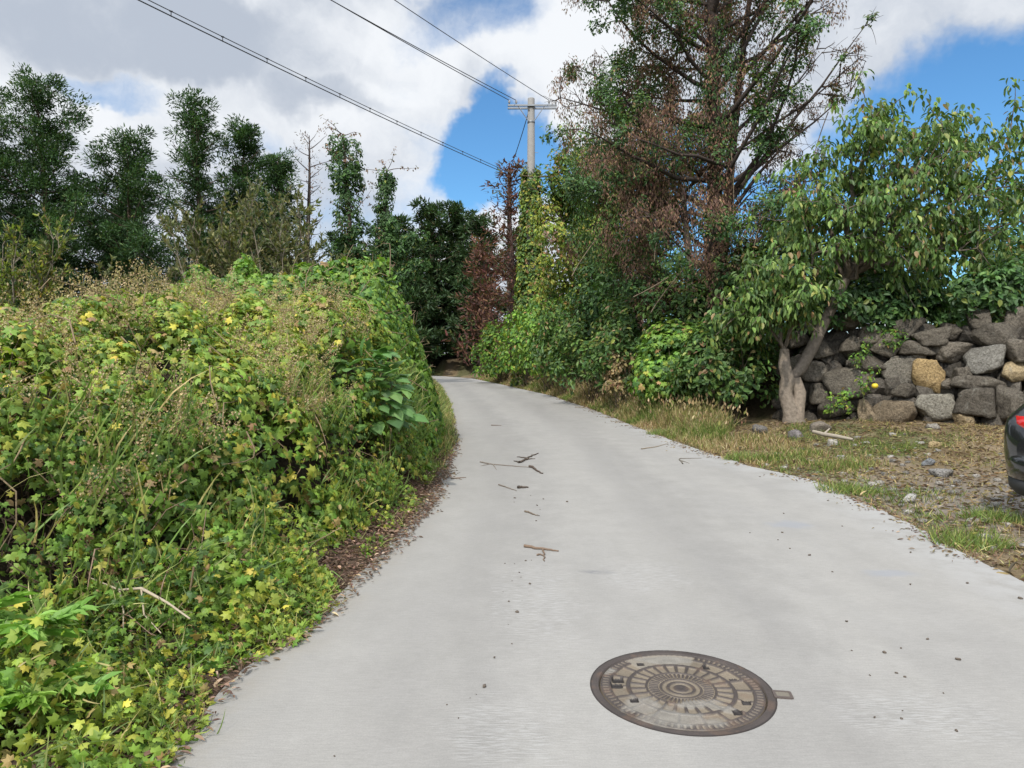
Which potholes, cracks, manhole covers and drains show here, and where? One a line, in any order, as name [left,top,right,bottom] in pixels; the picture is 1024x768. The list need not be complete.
manhole cover [590,650,794,737]
